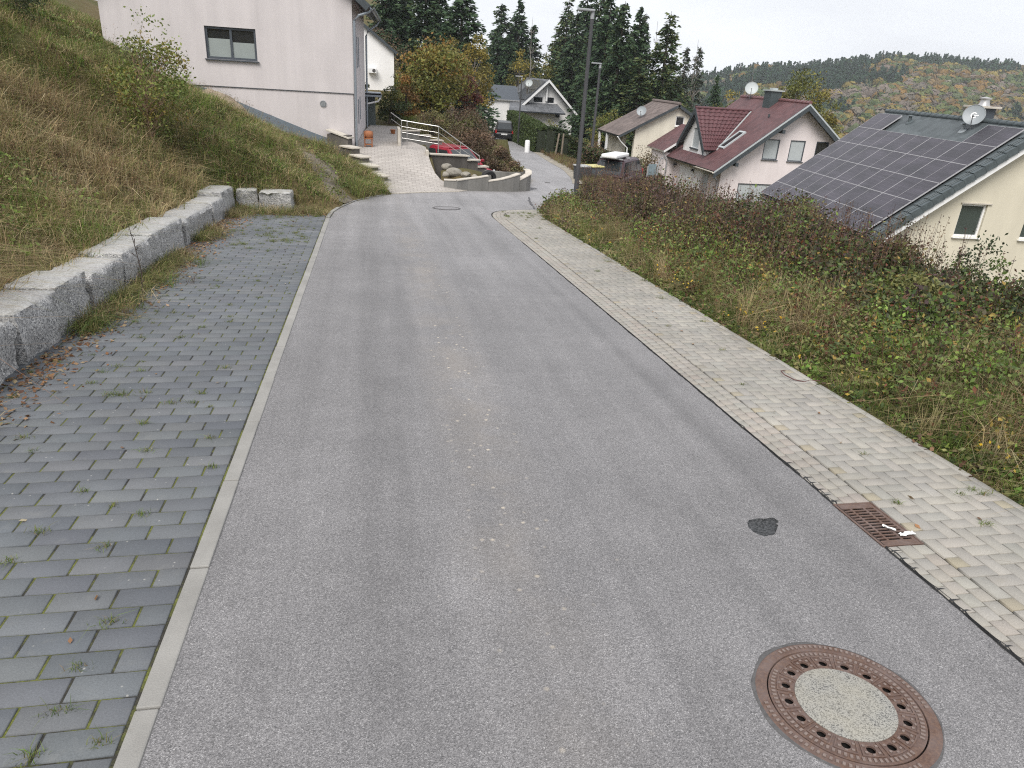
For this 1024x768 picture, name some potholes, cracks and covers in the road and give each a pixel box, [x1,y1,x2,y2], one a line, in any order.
pothole [747,518,778,536]
drain grate [832,502,924,548]
manhole cover [751,642,945,768]
